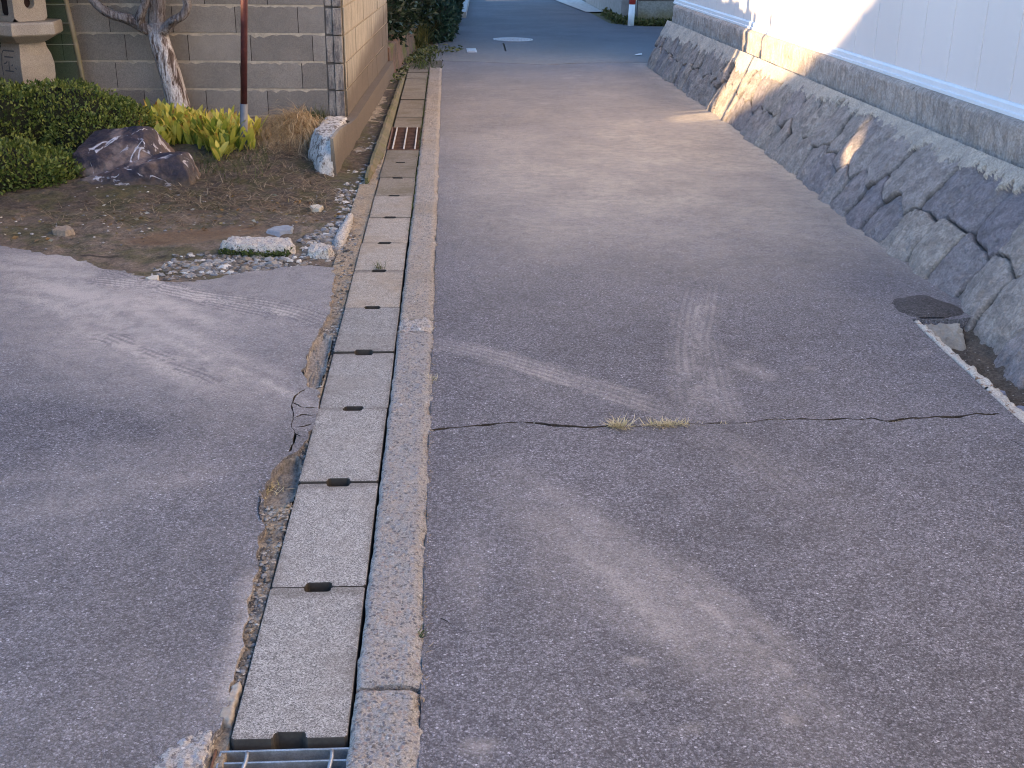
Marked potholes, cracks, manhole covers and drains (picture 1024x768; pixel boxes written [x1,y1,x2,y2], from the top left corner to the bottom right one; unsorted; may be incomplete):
crack [432,413,999,431]
drain grate [387,127,424,151]
crack [288,390,315,452]
drain grate [210,747,349,768]
